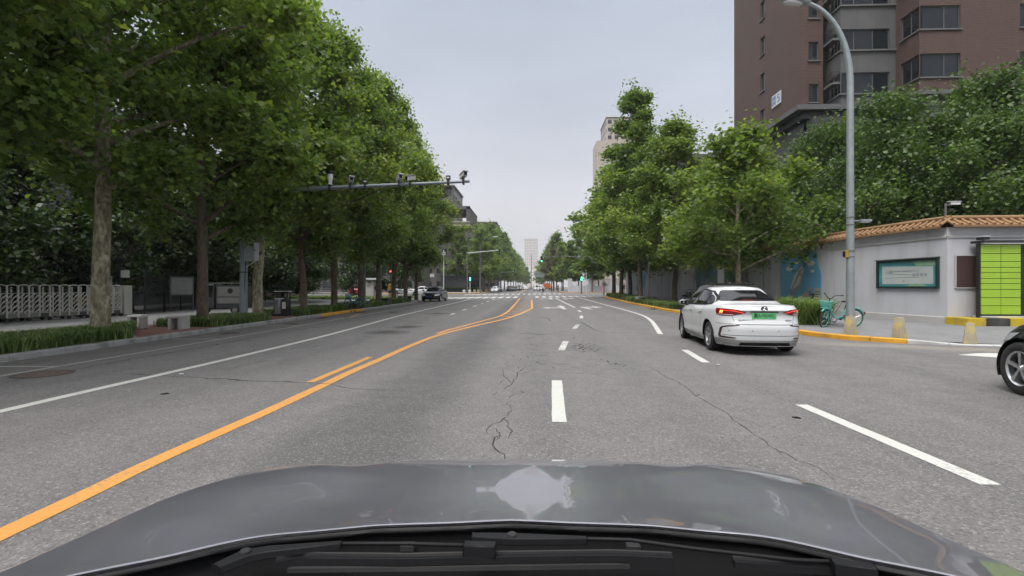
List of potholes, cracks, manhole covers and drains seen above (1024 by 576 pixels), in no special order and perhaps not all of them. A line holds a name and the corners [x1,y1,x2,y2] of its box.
crack [486,317,626,459]
manhole cover [8,370,75,379]
crack [666,377,833,479]
